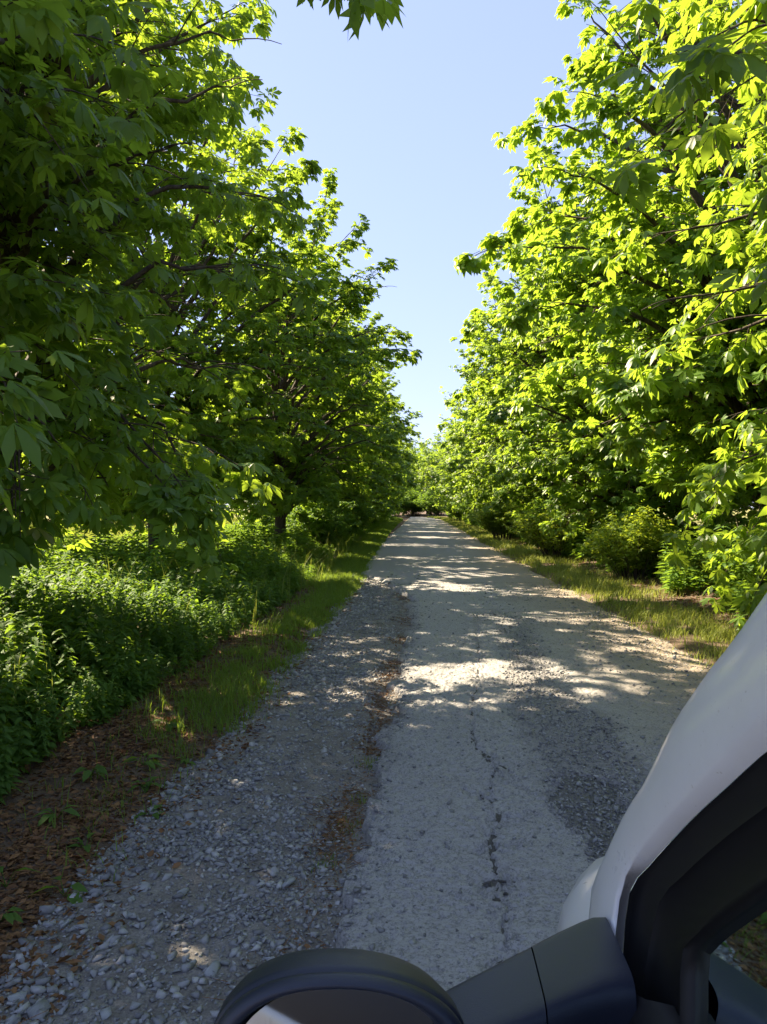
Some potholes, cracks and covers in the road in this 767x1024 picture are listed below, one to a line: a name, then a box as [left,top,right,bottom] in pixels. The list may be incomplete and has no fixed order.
crack [470,615,515,964]
pothole [549,774,627,859]
